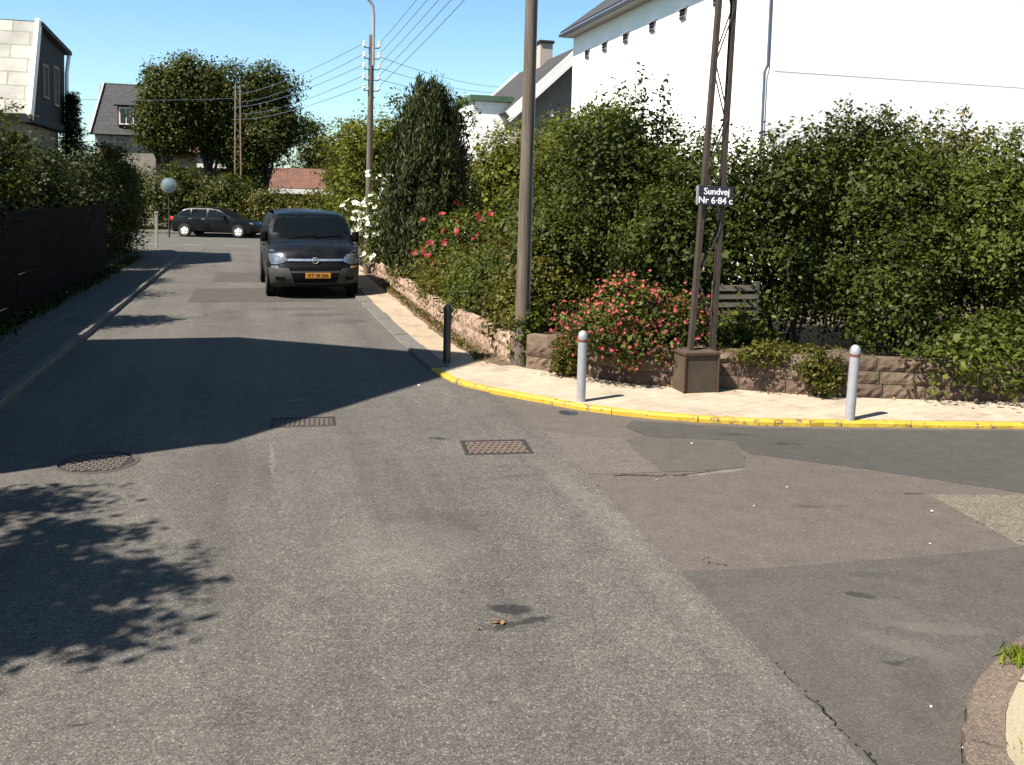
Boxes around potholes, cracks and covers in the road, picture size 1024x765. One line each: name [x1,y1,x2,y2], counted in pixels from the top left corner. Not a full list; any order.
drain grate [460,439,534,455]
manhole cover [52,450,140,474]
